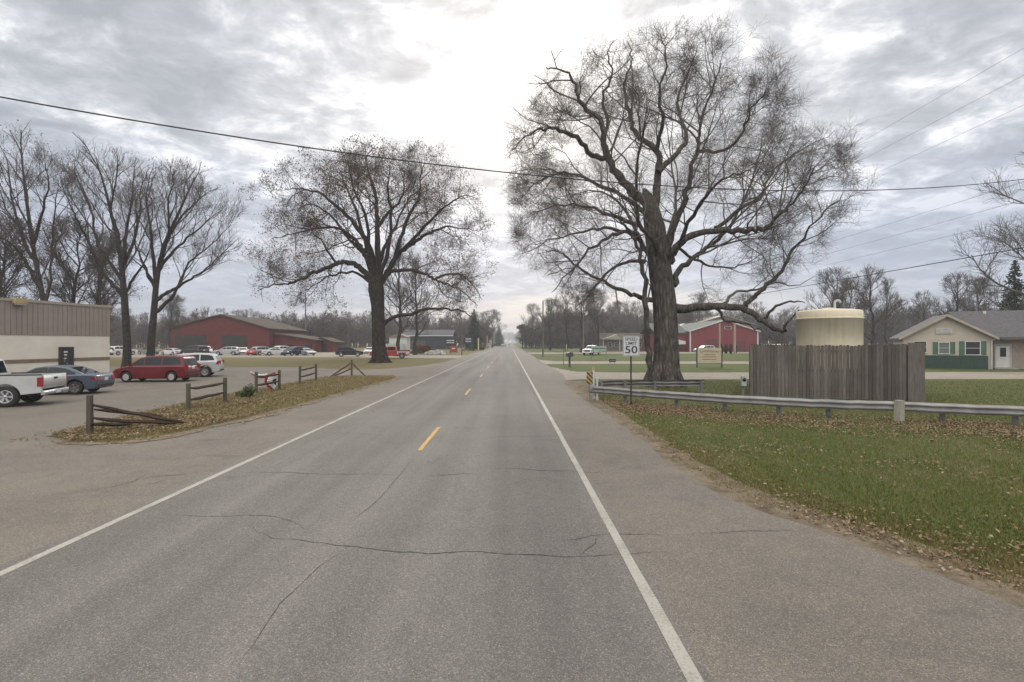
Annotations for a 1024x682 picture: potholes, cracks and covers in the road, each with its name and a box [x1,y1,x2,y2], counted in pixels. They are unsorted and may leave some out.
crack [234,395,598,671]
crack [252,527,681,557]
